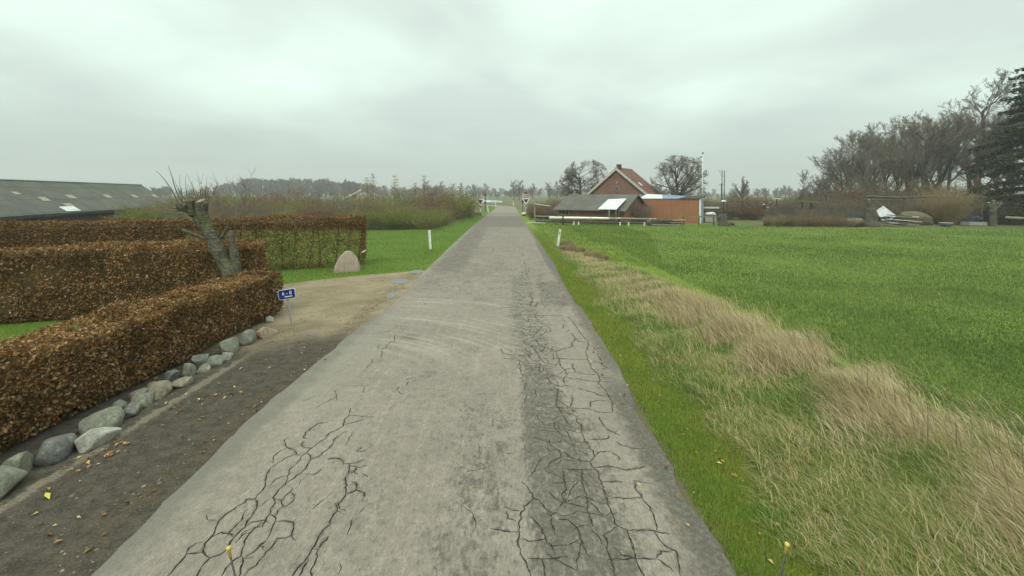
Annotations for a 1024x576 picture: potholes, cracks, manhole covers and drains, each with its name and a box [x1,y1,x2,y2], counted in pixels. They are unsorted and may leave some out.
crack [168,408,368,576]
crack [501,257,562,368]
crack [490,314,680,576]
